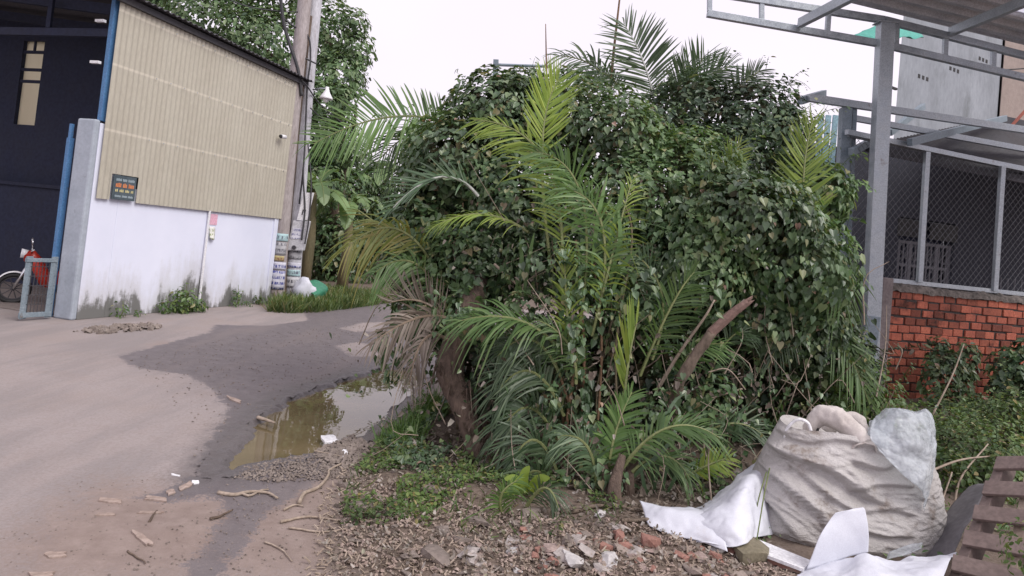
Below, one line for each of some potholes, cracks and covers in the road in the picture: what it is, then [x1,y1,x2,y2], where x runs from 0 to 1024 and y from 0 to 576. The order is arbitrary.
pothole [194,364,438,479]
